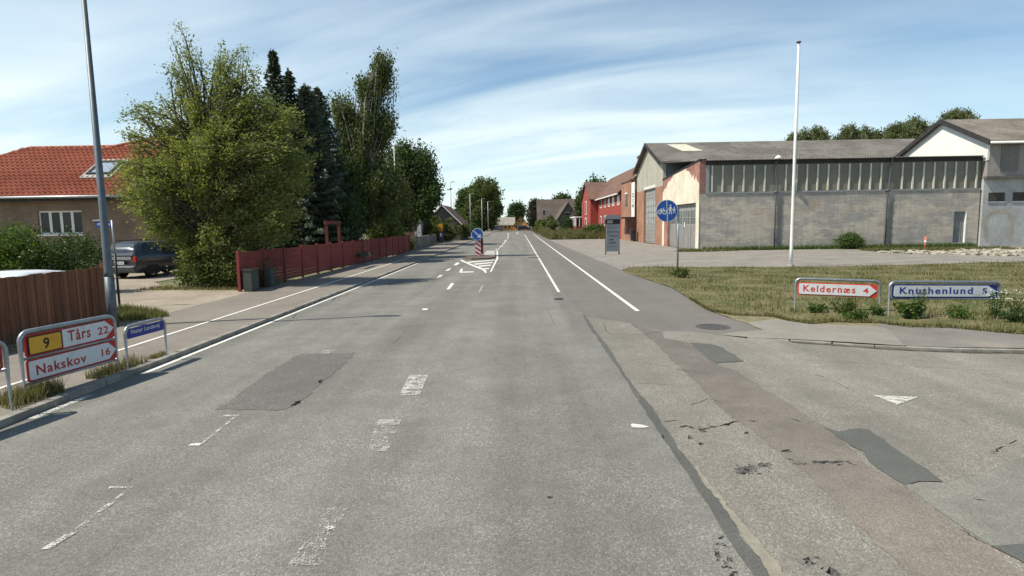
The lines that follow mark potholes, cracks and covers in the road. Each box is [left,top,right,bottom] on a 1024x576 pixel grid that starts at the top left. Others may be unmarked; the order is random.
crack [789,459,865,467]
